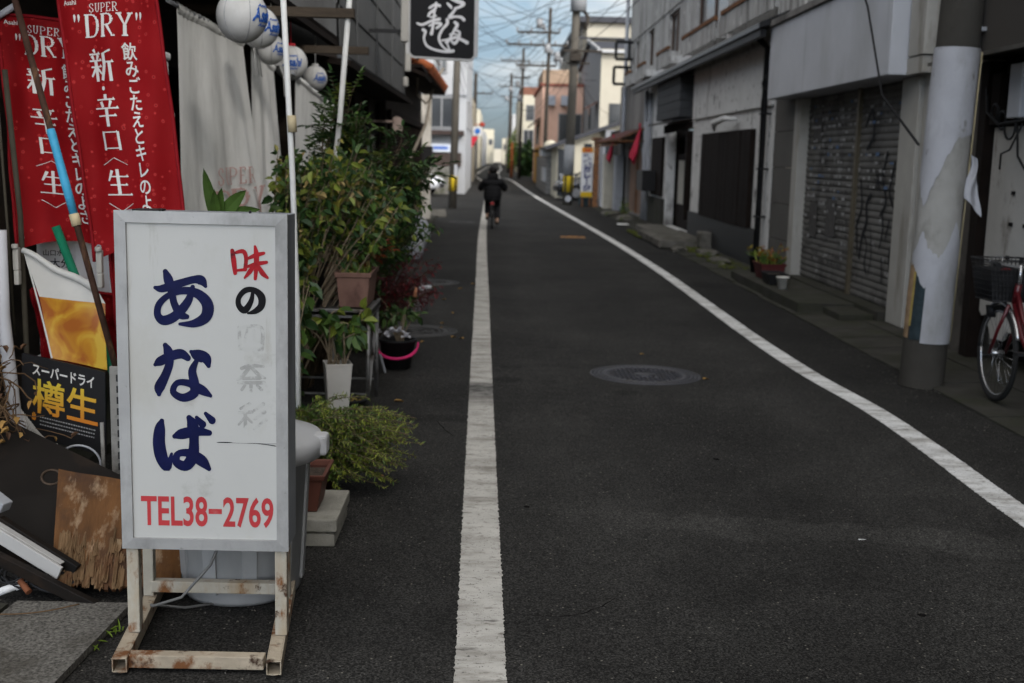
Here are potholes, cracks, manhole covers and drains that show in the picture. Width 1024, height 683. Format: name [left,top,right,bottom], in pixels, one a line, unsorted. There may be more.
manhole cover [590,365,701,385]
manhole cover [379,324,457,337]
